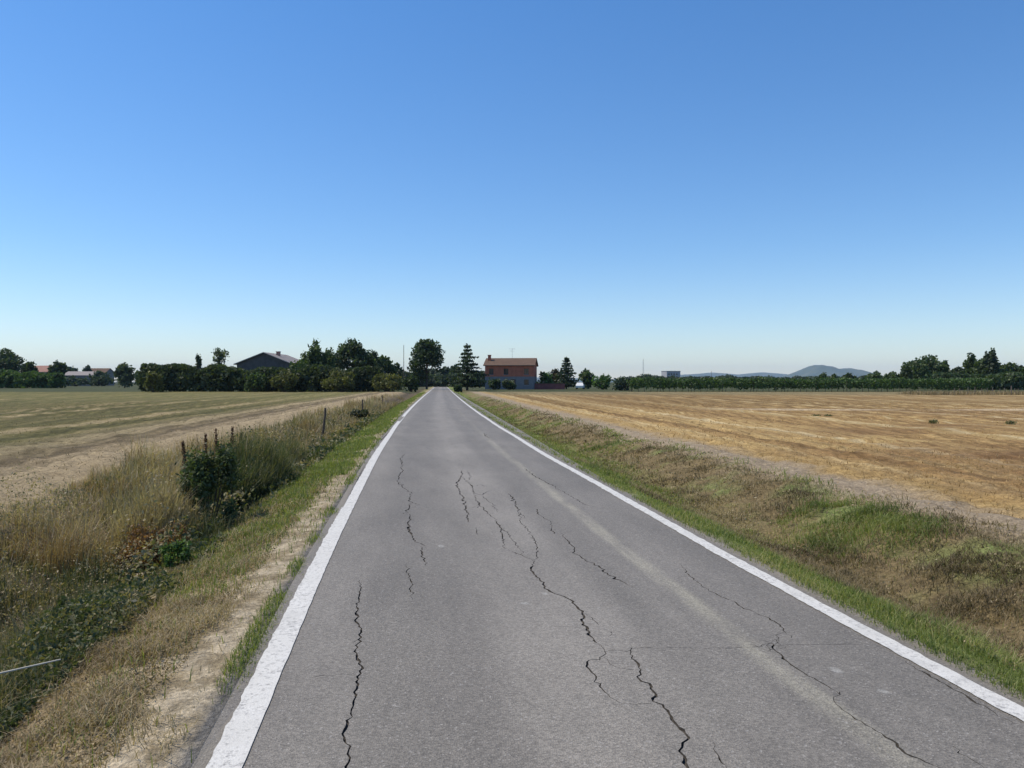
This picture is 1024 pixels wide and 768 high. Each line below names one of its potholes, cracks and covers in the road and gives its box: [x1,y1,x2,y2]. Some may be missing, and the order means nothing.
crack [455,470,939,768]
crack [288,580,364,768]
crack [397,455,427,598]
